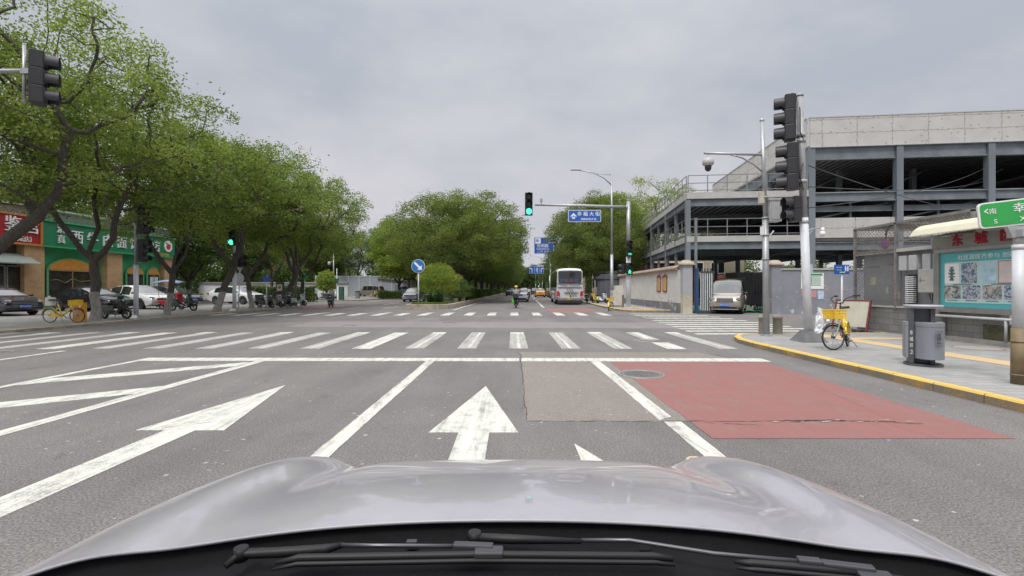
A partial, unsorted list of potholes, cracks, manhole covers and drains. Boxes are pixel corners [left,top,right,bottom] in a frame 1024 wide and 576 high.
manhole cover [618,370,665,379]
